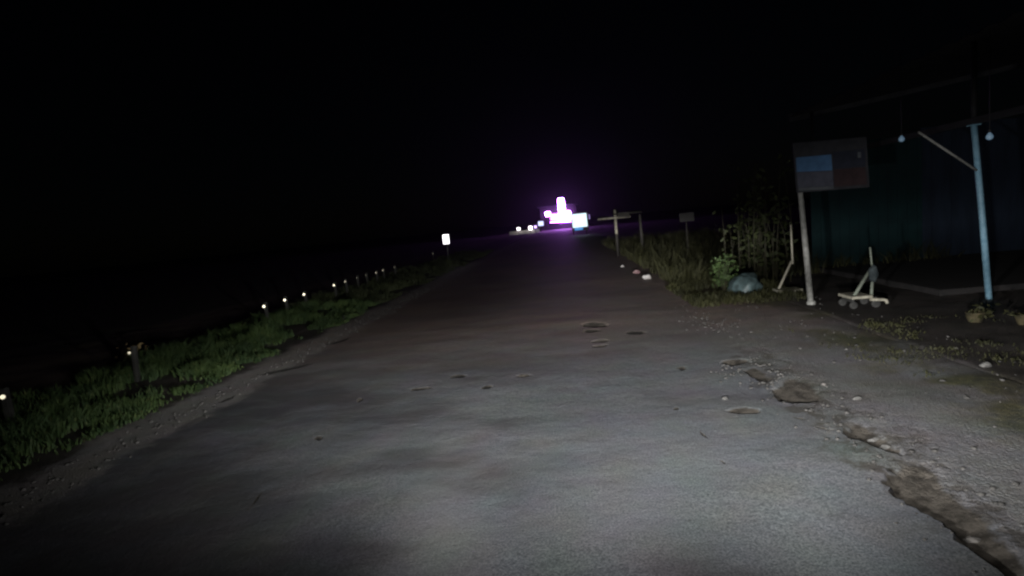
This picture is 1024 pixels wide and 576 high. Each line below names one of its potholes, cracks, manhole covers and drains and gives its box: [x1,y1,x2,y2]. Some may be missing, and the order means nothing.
pothole [722,406,762,414]
pothole [741,365,774,382]
pothole [841,419,906,456]
pothole [770,376,824,404]
pothole [880,459,1024,576]
pothole [718,358,752,366]
